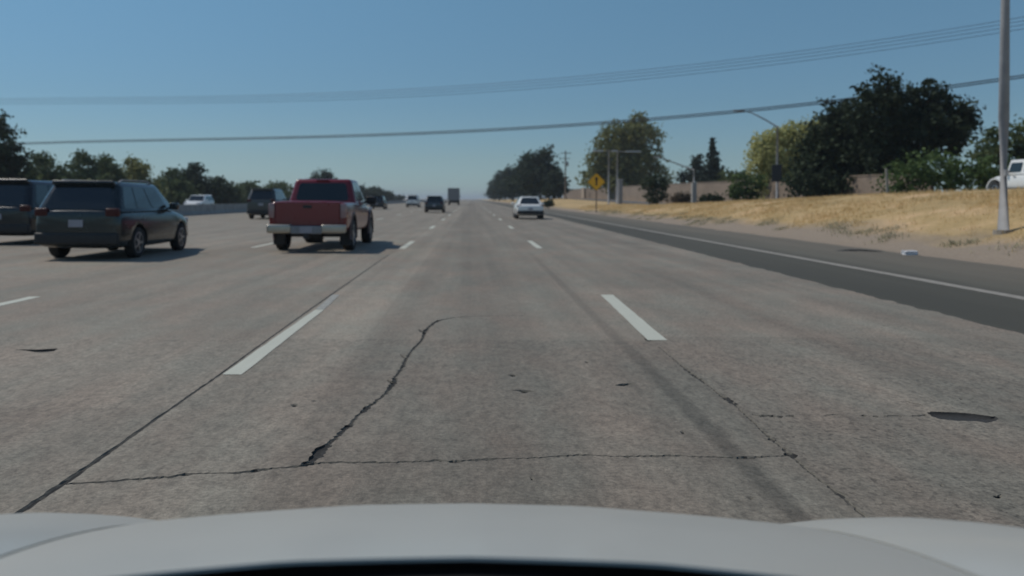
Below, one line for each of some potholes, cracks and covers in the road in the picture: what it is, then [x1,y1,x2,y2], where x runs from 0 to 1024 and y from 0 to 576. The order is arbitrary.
pothole [927,412,998,423]
crack [750,401,926,418]
crack [64,316,787,485]
